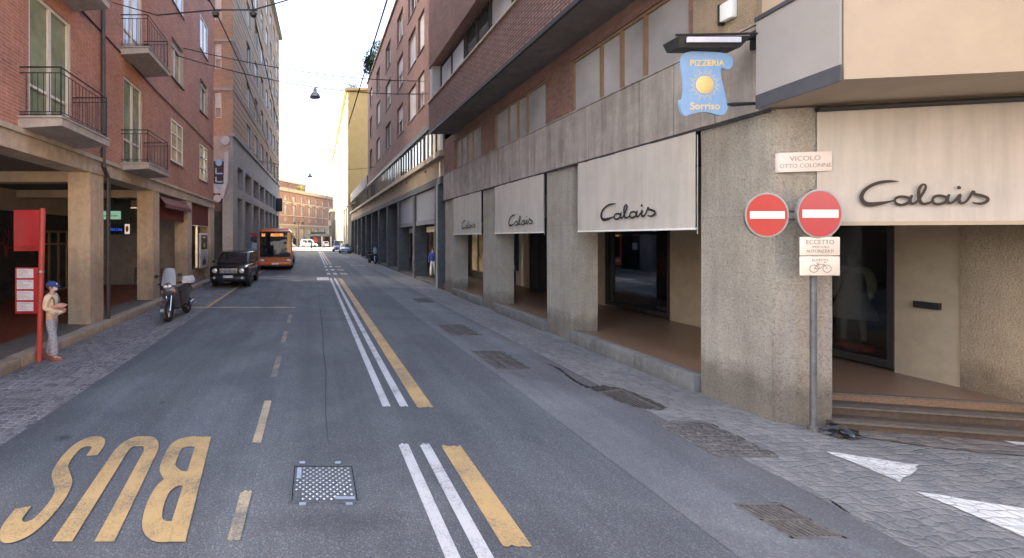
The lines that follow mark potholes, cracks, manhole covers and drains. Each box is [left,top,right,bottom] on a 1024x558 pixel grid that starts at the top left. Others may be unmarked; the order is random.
crack [318,291,328,437]
crack [549,364,593,389]
drain grate [599,389,662,410]
manhole cover [288,461,361,506]
drain grate [732,502,848,539]
